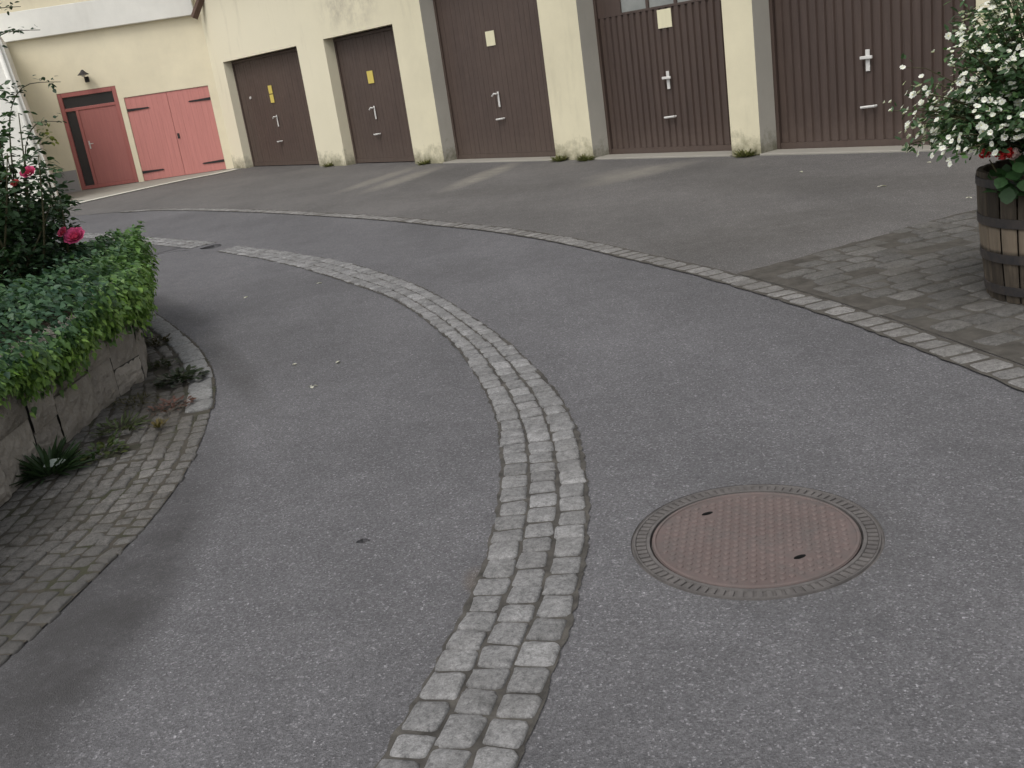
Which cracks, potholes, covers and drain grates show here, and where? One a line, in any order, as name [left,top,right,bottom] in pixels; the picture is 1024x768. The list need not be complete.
manhole cover [631,484,885,601]
